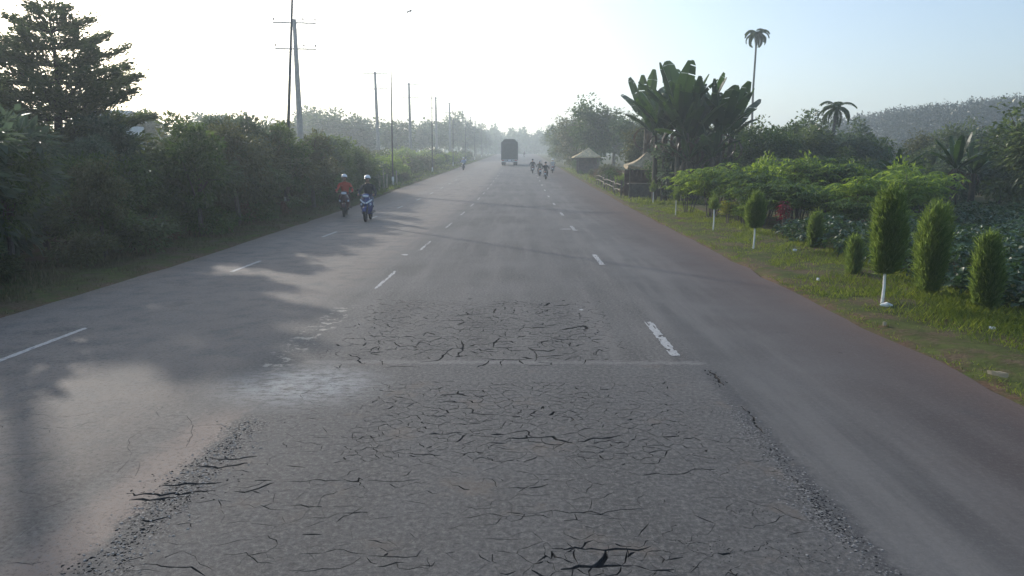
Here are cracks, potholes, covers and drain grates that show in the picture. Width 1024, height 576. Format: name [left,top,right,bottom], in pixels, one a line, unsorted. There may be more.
crack [121,379,845,576]
crack [319,298,627,369]
crack [2,397,202,564]
